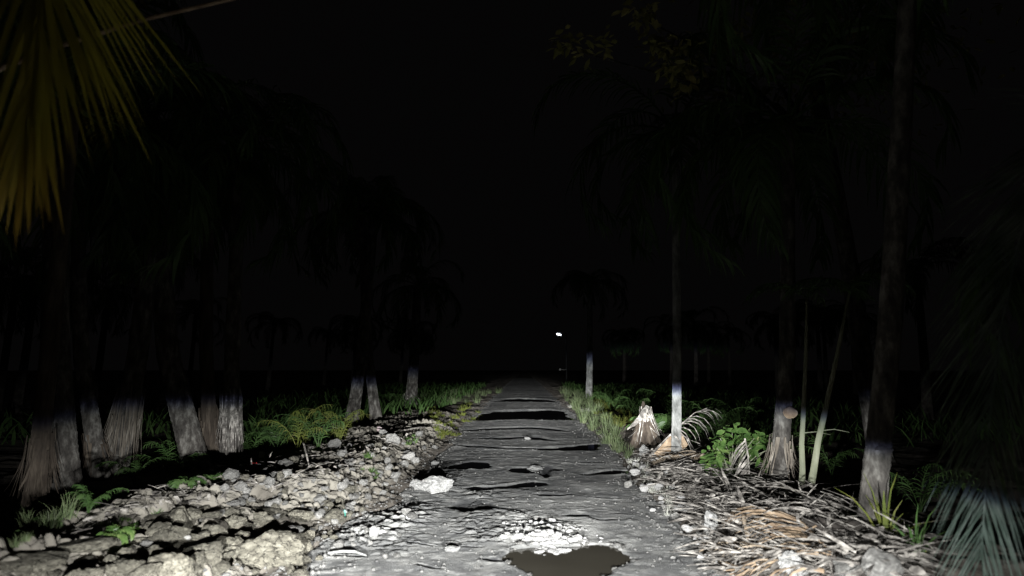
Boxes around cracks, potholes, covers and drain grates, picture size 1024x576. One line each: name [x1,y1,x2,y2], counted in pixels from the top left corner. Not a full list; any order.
pothole [539,464,562,477]
pothole [448,461,493,470]
pothole [470,409,575,421]
pothole [498,543,633,576]
pothole [447,498,498,512]
crack [455,426,569,458]
